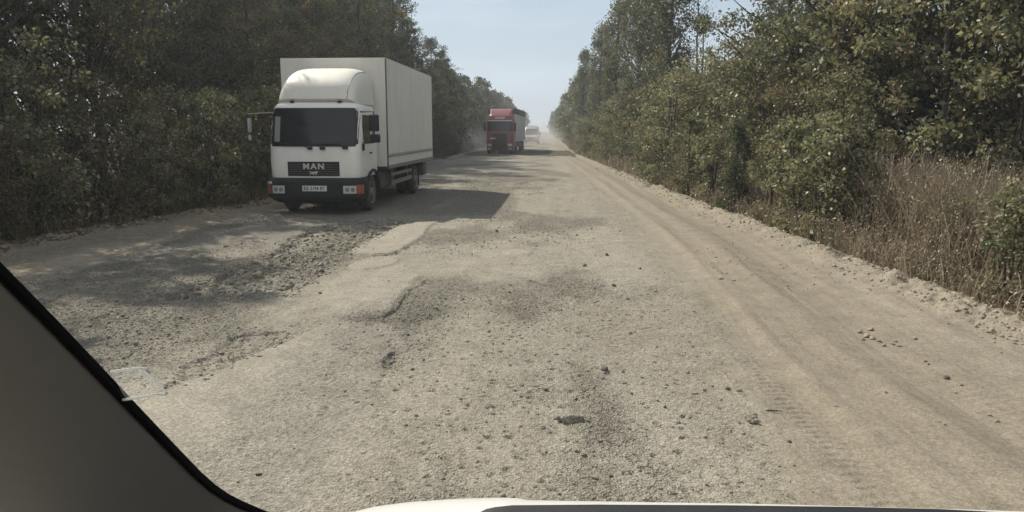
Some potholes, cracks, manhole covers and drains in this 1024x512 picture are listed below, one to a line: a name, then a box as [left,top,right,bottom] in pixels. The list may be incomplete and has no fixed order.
pothole [382,351,407,370]
pothole [160,219,408,301]
pothole [551,413,596,426]
pothole [146,330,298,400]
